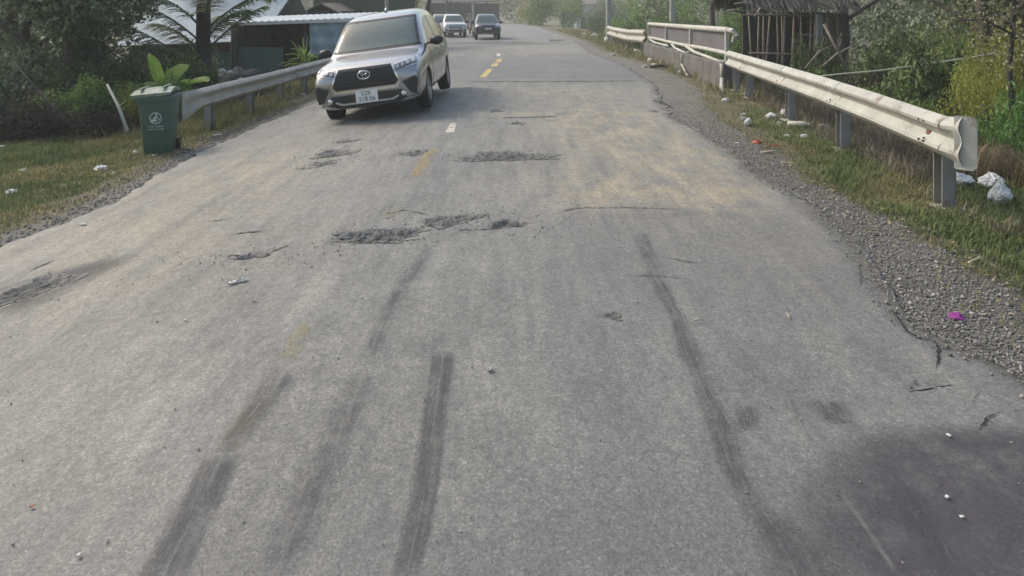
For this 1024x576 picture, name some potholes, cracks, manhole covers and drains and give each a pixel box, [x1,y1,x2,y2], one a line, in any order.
pothole [423,213,487,229]
pothole [309,149,361,159]
pothole [0,271,89,307]
pothole [332,228,431,244]
pothole [492,218,528,229]
pothole [453,150,560,162]
crack [972,392,1024,430]
